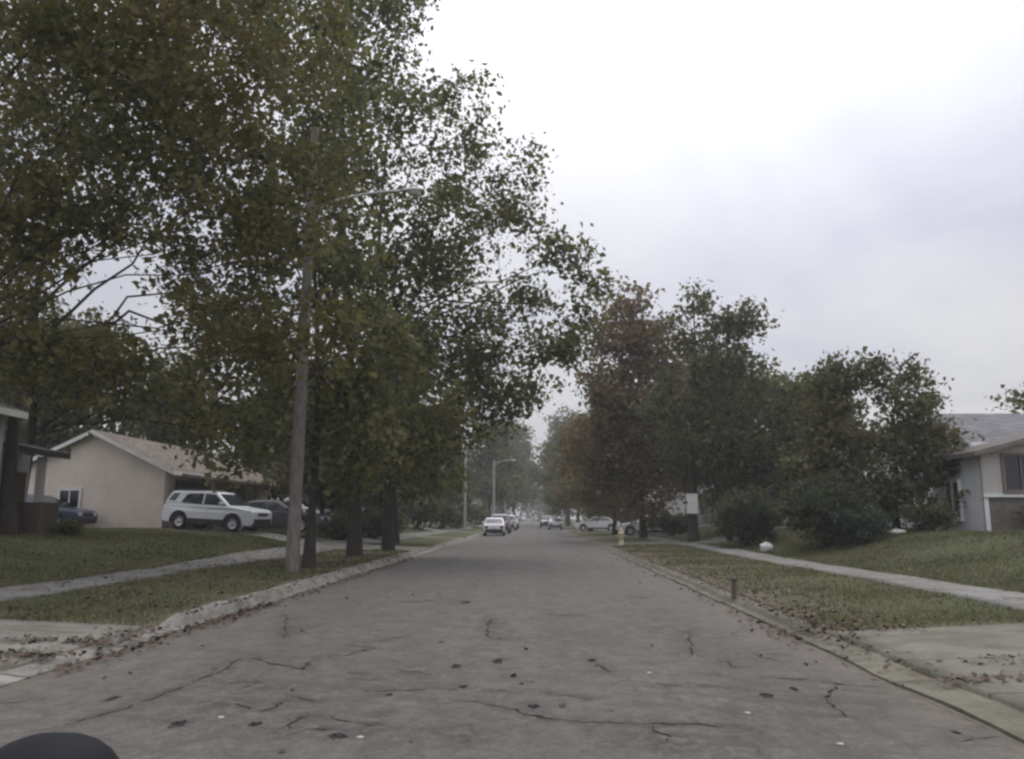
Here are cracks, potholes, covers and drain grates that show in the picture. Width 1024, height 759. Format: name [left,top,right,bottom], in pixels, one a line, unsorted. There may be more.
crack [64,658,376,736]
crack [770,678,870,718]
crack [472,690,722,742]
